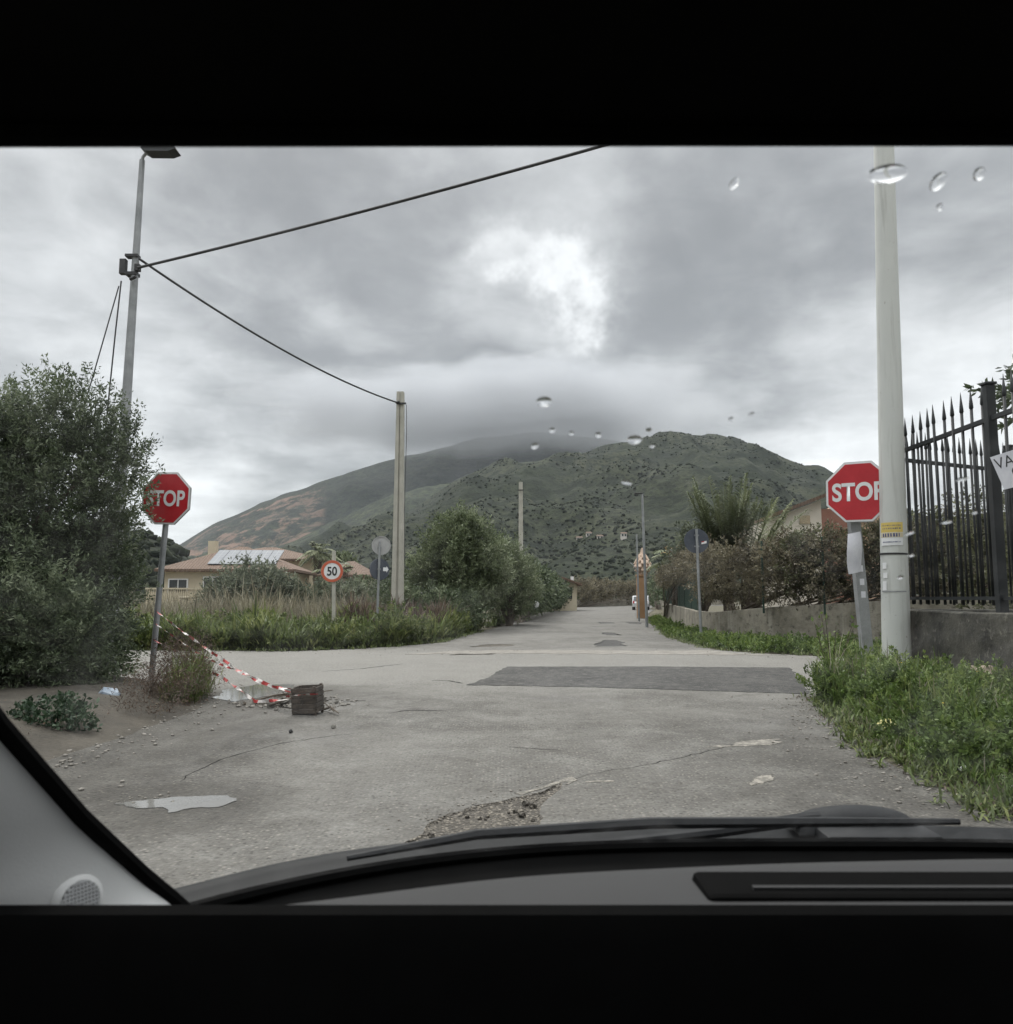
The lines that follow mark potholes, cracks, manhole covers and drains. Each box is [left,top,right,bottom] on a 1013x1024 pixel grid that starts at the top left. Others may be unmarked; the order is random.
crack [576,748,721,779]
pothole [405,783,562,843]
